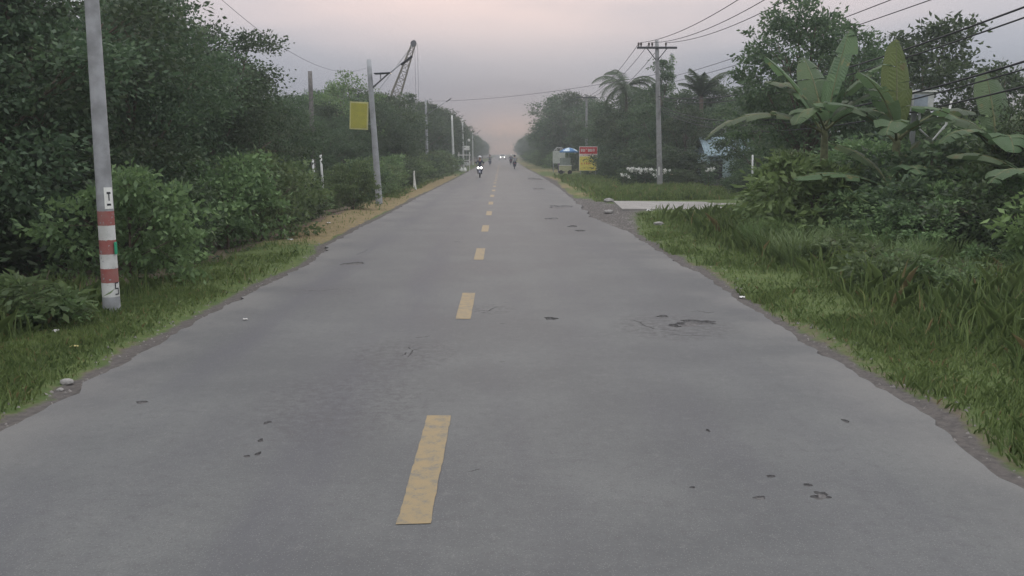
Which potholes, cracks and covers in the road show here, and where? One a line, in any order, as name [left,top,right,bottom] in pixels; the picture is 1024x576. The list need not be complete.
pothole [810,491,832,500]
pothole [669,319,716,328]
